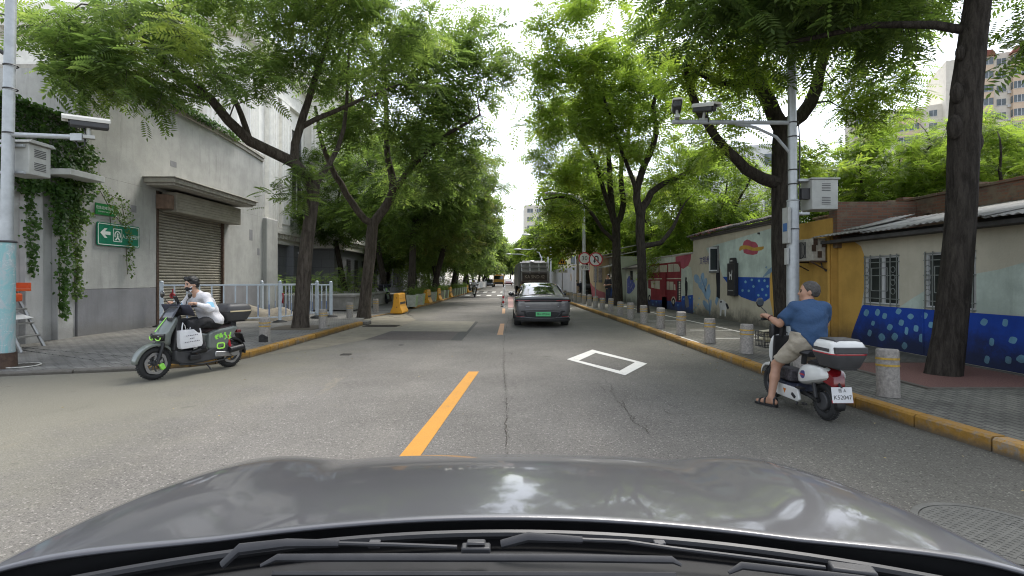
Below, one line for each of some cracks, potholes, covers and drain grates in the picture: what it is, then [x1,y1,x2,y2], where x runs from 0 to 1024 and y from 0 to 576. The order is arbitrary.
crack [601,386,683,434]
manhole cover [910,502,1024,566]
